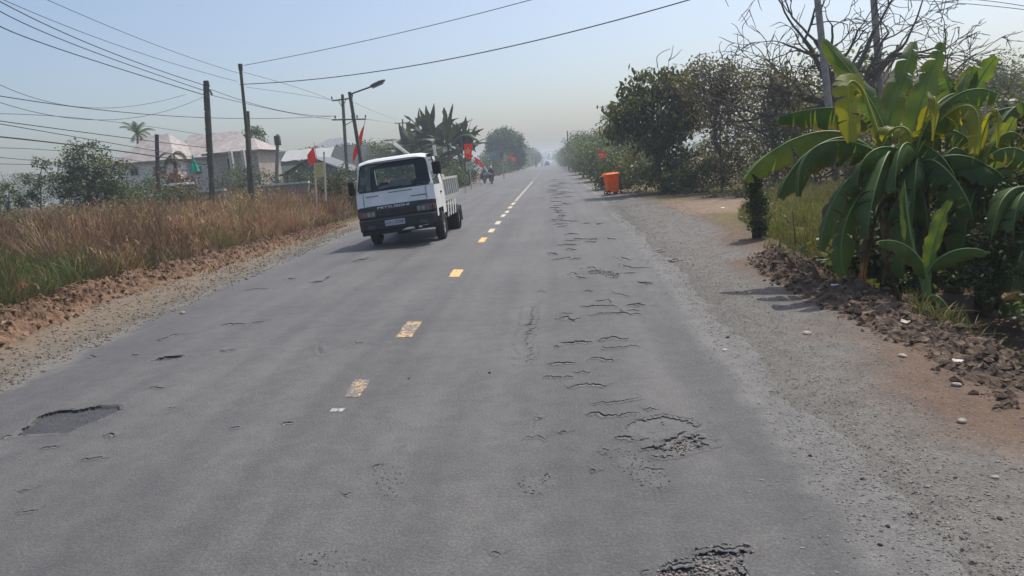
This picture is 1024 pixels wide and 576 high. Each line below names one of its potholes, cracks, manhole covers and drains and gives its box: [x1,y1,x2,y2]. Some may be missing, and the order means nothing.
pothole [9,402,128,438]
pothole [618,413,709,449]
pothole [367,460,414,508]
pothole [600,444,675,492]
pothole [645,433,712,461]
crack [510,179,723,474]
pothole [143,353,190,364]
pothole [513,471,562,497]
pothole [647,542,761,576]
pothole [284,546,379,573]
